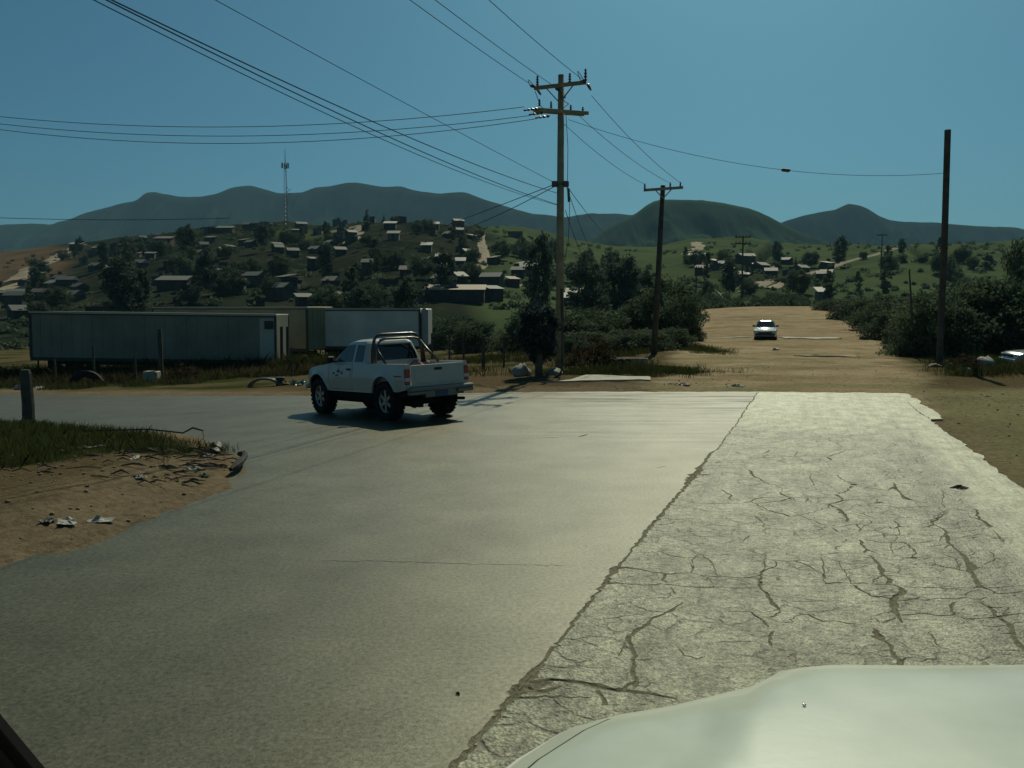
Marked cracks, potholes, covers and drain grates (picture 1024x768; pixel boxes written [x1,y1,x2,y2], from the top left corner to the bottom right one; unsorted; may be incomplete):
crack [350,392,1024,768]
